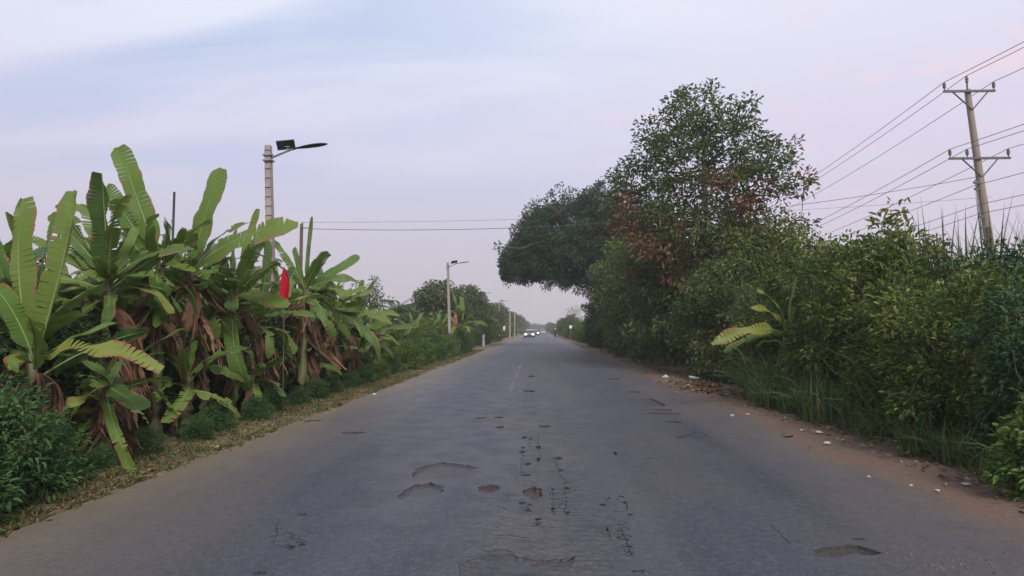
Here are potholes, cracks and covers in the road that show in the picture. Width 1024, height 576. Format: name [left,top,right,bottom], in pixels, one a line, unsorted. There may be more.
pothole [522,487,543,500]
pothole [398,482,444,499]
pothole [813,544,882,557]
pothole [412,462,479,479]
crack [269,513,307,550]
crack [469,396,575,558]
pothole [458,554,576,576]
pothole [477,484,500,493]
crack [599,496,653,574]
